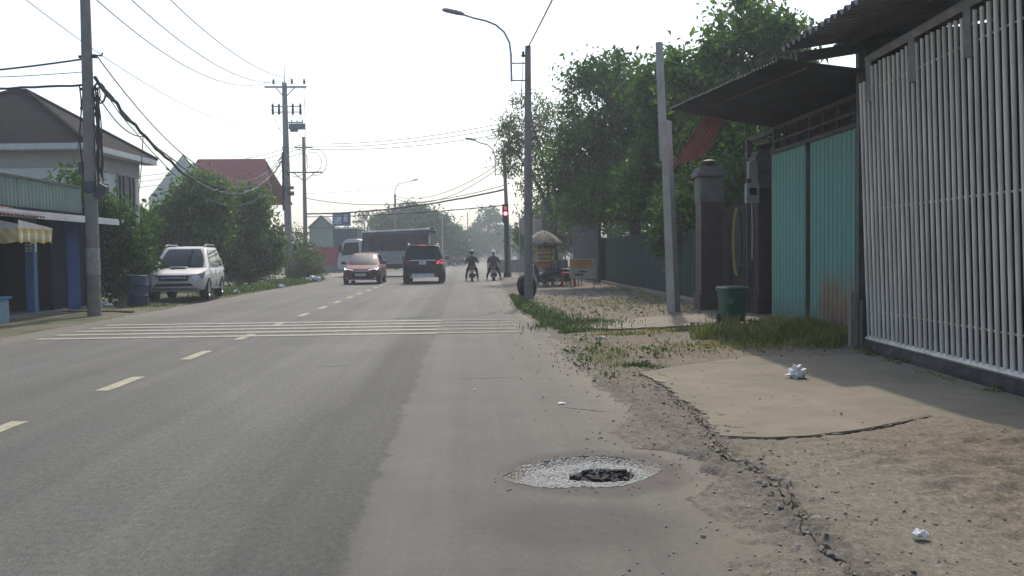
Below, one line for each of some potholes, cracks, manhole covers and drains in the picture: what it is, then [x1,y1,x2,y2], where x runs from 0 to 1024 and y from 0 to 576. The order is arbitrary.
pothole [501,455,663,488]
crack [648,378,929,576]
